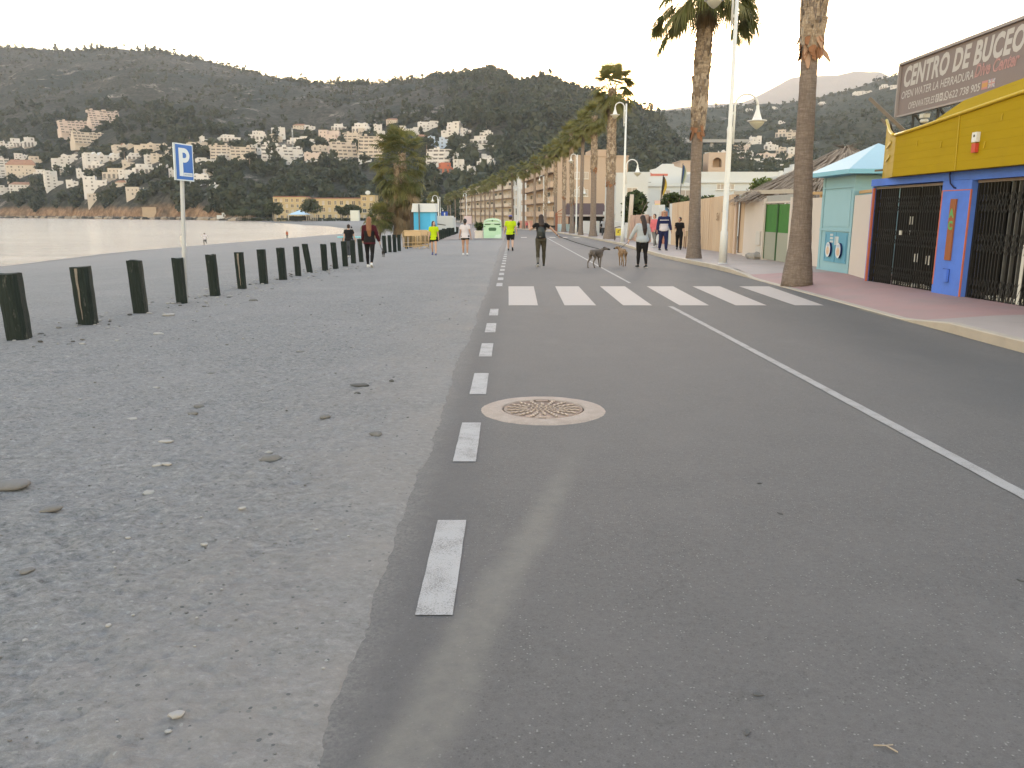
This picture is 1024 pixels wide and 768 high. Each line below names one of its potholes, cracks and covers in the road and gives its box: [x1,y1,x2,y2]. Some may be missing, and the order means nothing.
manhole cover [481,396,606,425]
